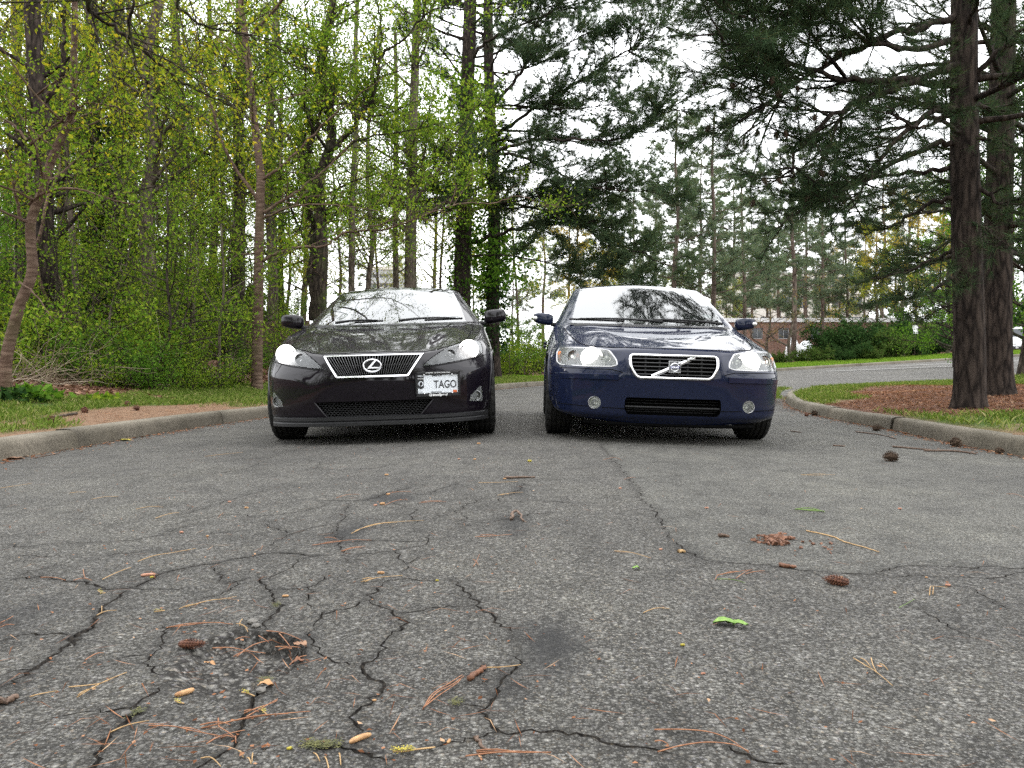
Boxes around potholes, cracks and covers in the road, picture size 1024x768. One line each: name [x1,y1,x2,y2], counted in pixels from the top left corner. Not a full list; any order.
crack [724,744,789,765]
crack [439,483,560,525]
crack [0,484,512,768]
crack [423,656,673,754]
pothole [158,630,307,698]
